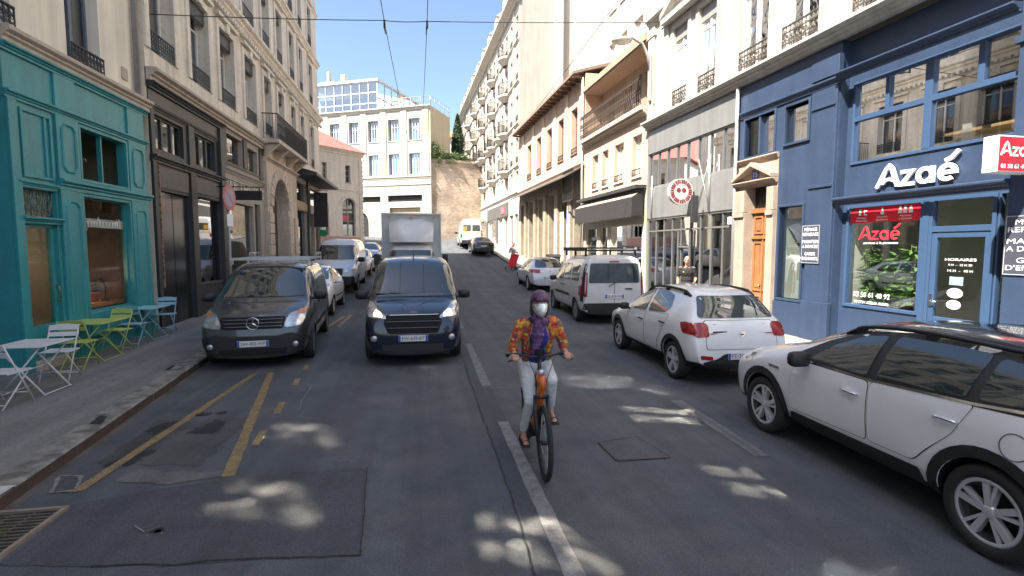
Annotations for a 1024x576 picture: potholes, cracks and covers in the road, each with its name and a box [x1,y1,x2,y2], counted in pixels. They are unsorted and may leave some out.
manhole cover [49,475,84,493]
manhole cover [598,436,670,461]
drain grate [0,505,70,560]
